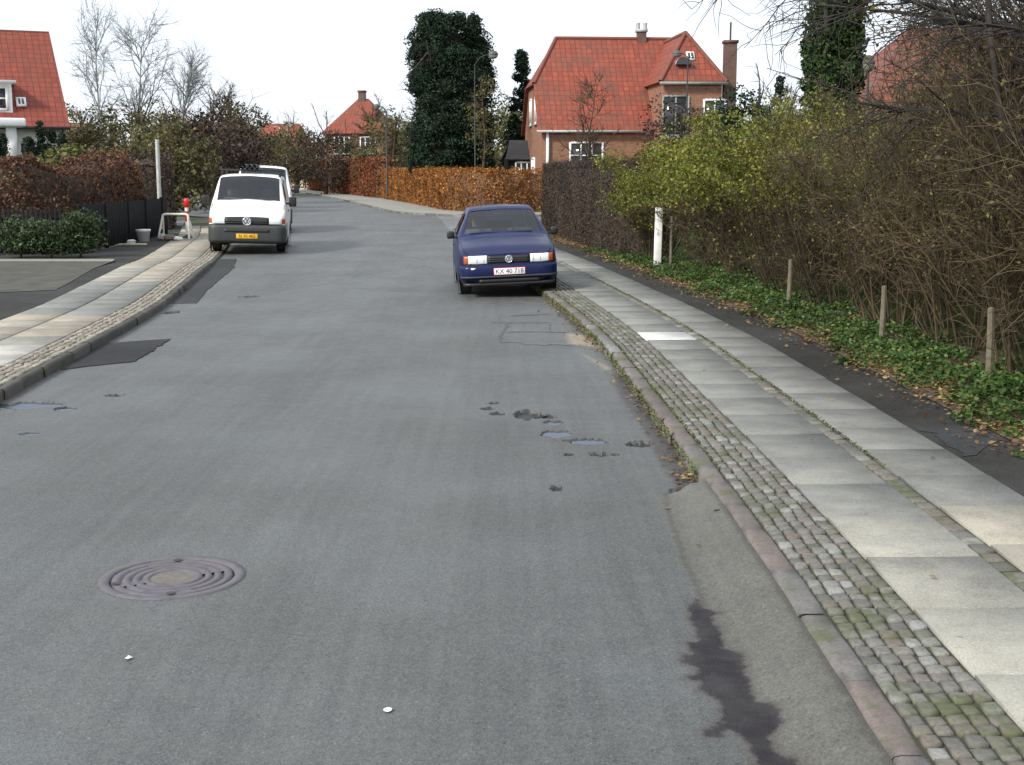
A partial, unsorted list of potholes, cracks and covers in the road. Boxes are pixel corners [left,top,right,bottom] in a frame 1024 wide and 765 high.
manhole cover [98,556,245,600]
pothole [516,410,545,421]
pothole [0,402,66,410]
